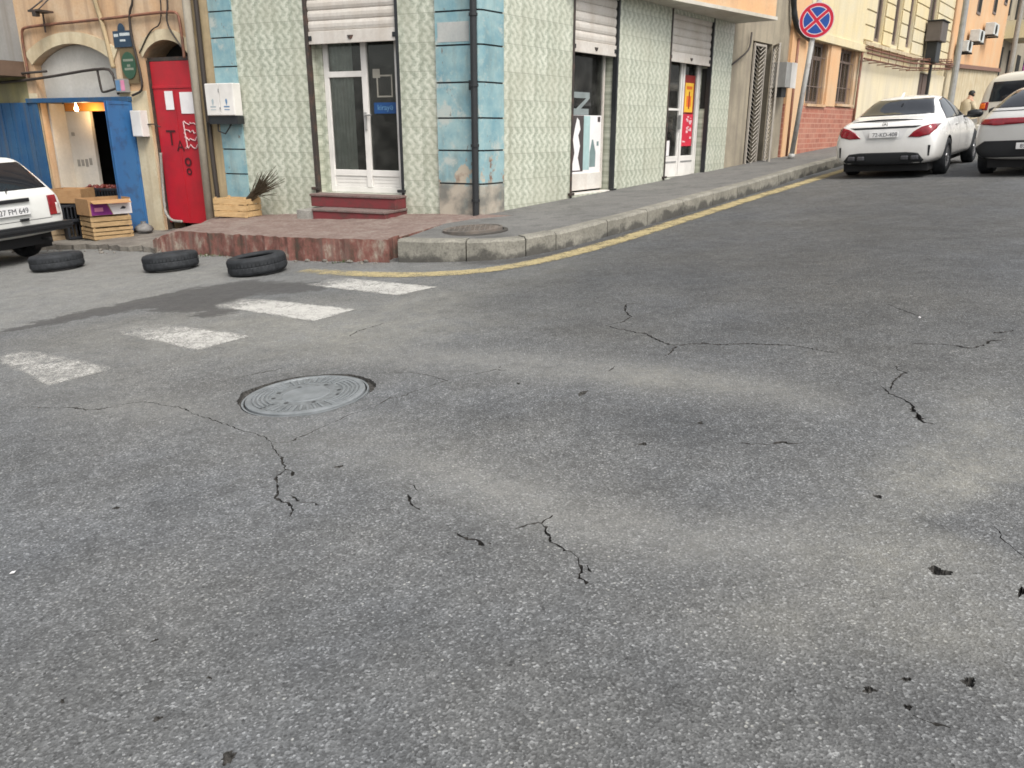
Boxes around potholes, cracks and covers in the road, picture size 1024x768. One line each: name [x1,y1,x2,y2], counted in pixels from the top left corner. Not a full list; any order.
crack [38,372,448,516]
crack [605,303,834,357]
manhole cover [237,374,376,417]
crack [457,533,491,546]
manhole cover [442,224,508,236]
pothole [928,565,953,576]
crack [881,363,933,424]
pothole [960,677,976,688]
crack [515,515,592,585]
crack [913,330,1013,349]
